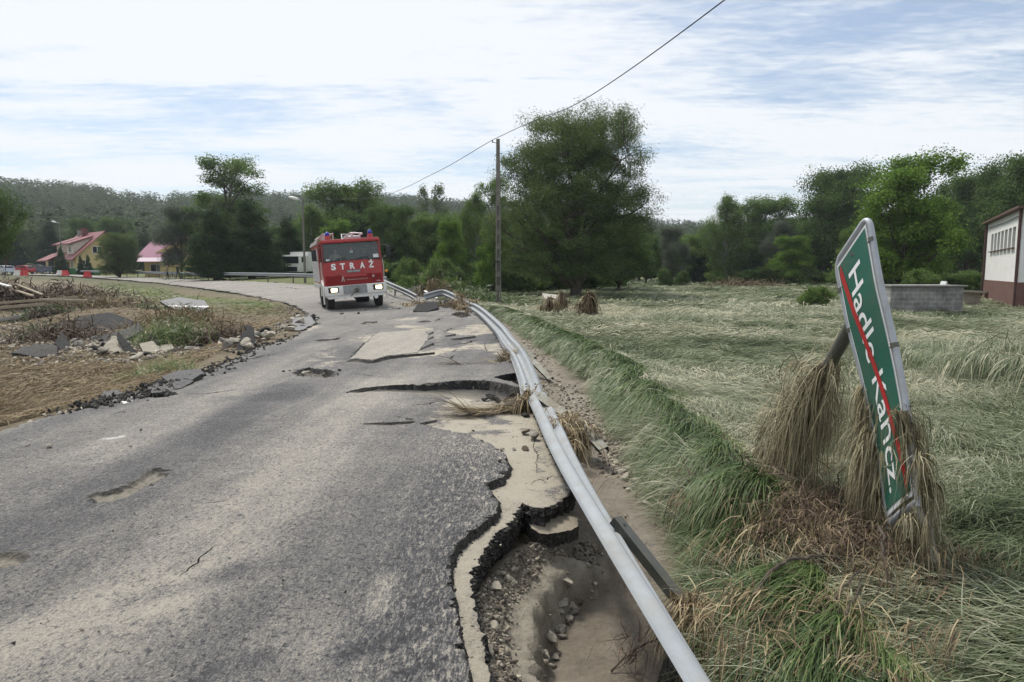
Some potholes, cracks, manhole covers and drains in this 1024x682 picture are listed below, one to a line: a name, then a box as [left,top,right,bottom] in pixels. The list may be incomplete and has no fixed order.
pothole [291,368,336,378]
pothole [495,373,519,385]
pothole [0,550,31,569]
crack [181,544,216,575]
pothole [85,467,171,503]
crack [332,311,491,358]
